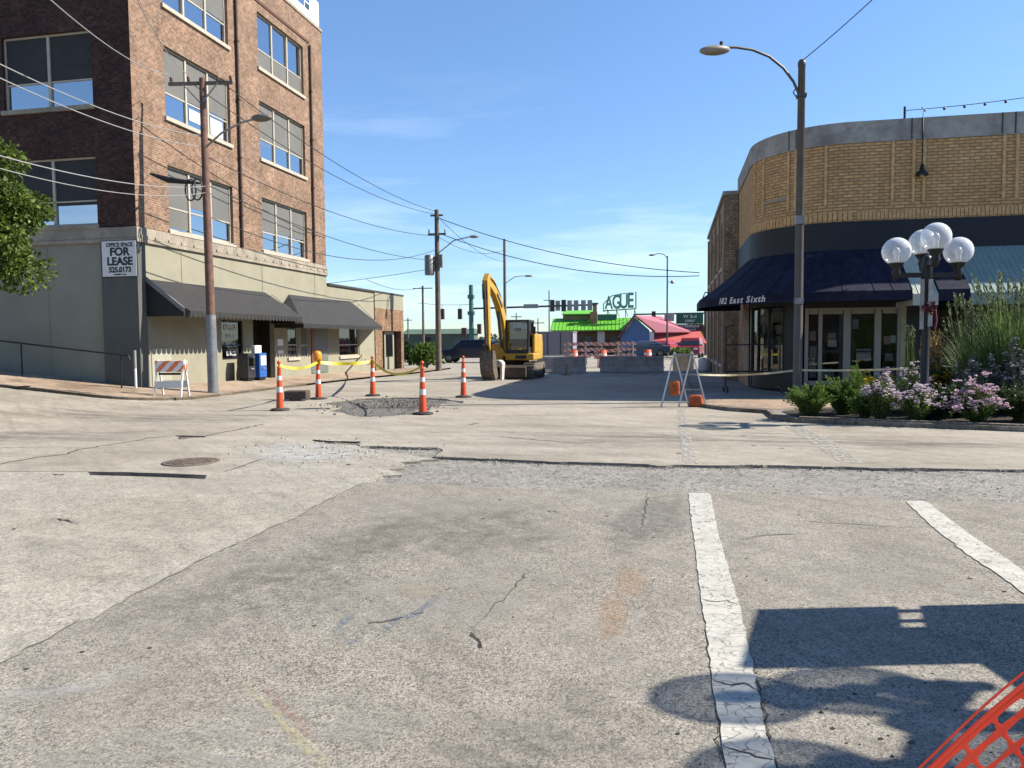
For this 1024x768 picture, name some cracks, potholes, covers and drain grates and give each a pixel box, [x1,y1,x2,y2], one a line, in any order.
crack [2,424,262,464]
manhole cover [161,457,220,466]
pothole [324,399,462,417]
crack [472,571,531,630]
crack [373,588,450,622]
